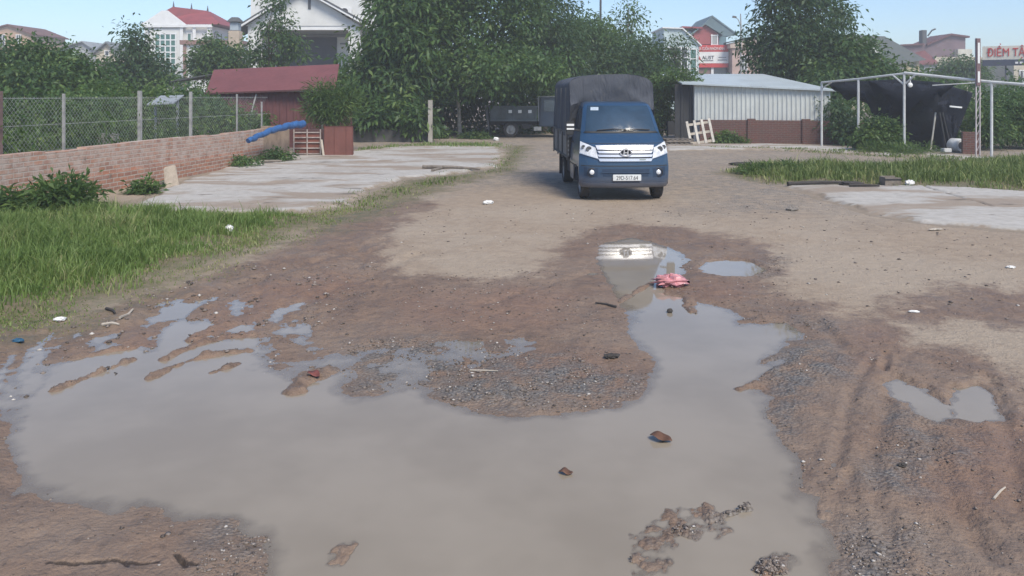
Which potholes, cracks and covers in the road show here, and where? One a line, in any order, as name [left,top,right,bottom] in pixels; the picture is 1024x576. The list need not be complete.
pothole [944,380,1011,423]
pothole [695,257,770,277]
pothole [875,375,967,424]
